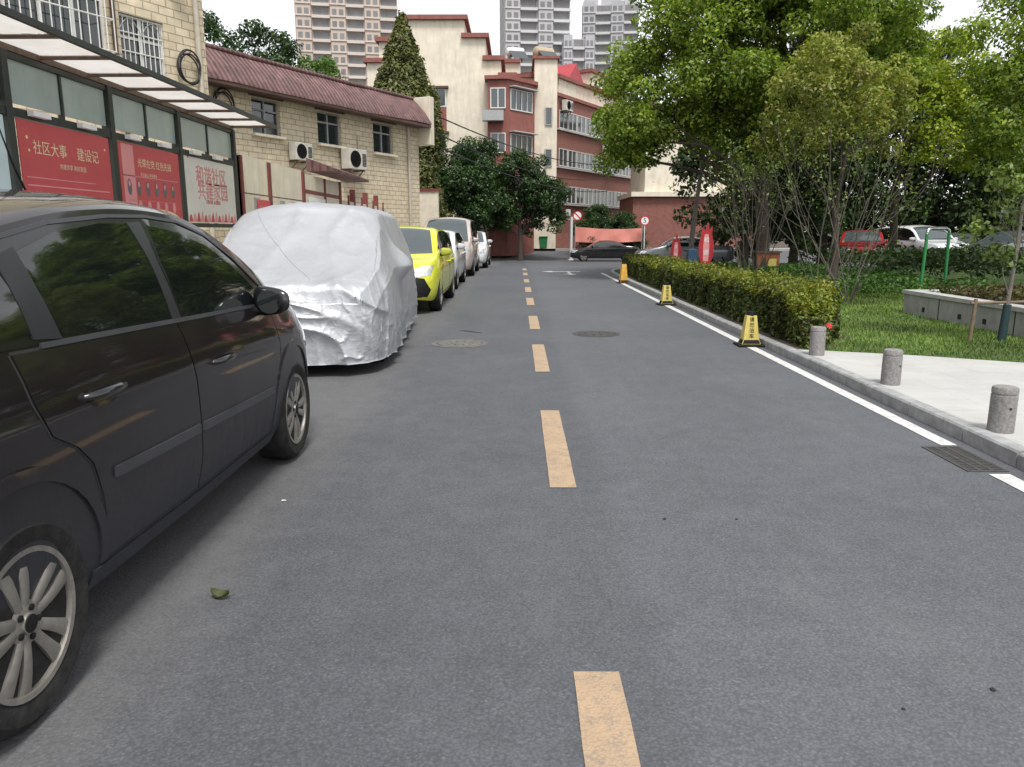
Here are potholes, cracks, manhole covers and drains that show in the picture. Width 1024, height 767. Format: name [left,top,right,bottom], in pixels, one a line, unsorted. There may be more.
drain grate [921,446,1010,472]
manhole cover [431,339,488,348]
